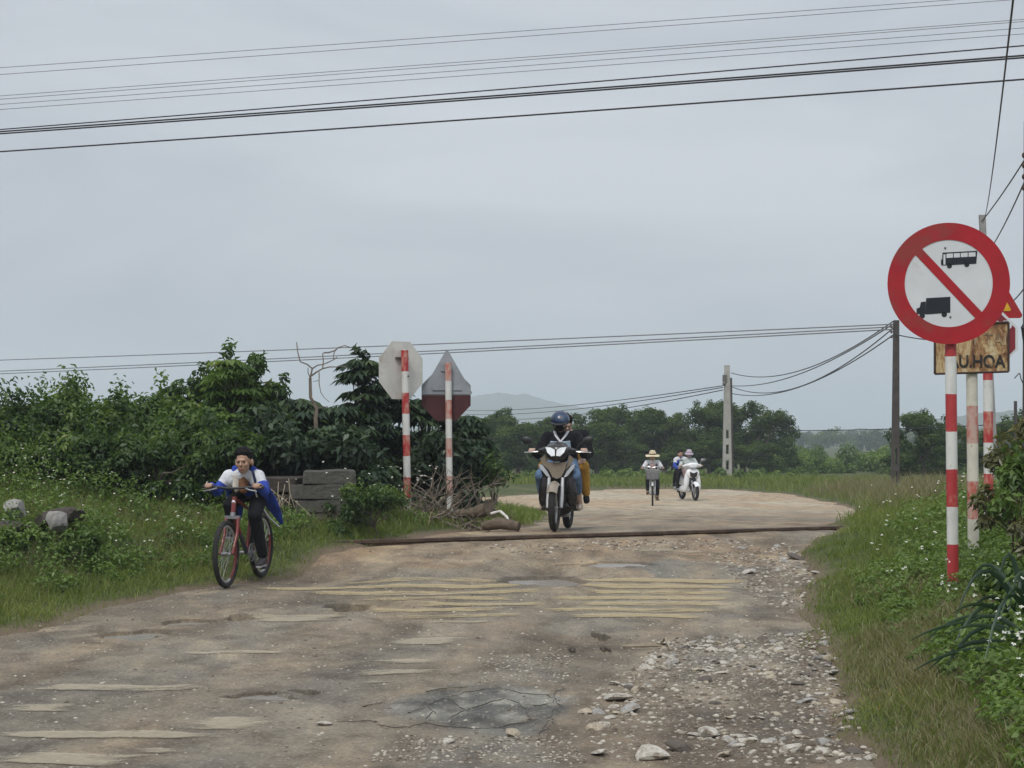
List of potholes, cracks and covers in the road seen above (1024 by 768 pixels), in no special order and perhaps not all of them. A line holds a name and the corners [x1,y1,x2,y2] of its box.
pothole [580,631,623,644]
pothole [312,602,380,614]
pothole [489,575,599,588]
crack [336,686,566,742]
pothole [152,618,234,627]
pothole [210,612,266,624]
pothole [276,688,338,698]
pothole [204,691,313,702]
